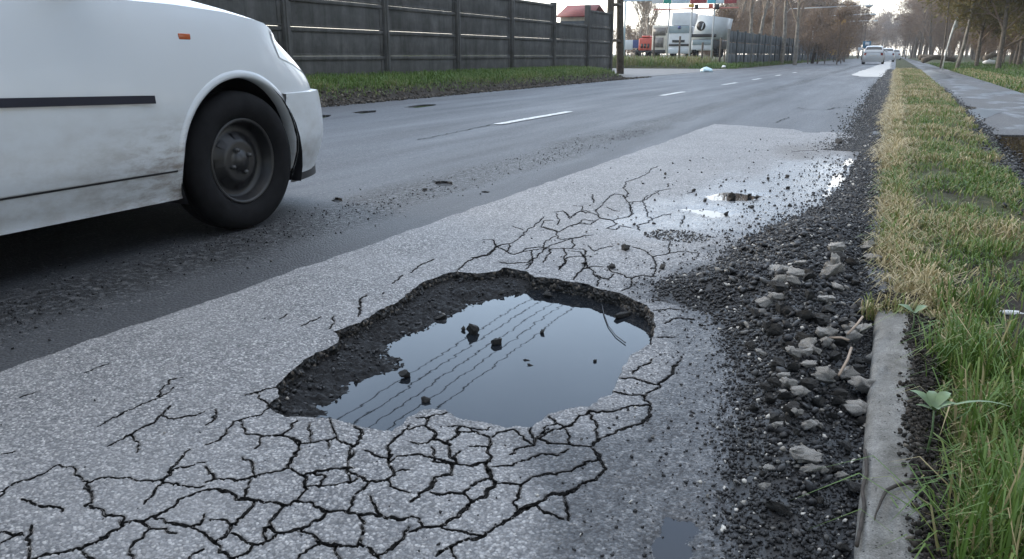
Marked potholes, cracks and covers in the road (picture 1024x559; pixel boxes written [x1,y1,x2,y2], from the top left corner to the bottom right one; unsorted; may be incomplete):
crack [279,314,335,329]
crack [0,359,682,559]
crack [457,166,700,338]
pothole [270,268,656,419]
